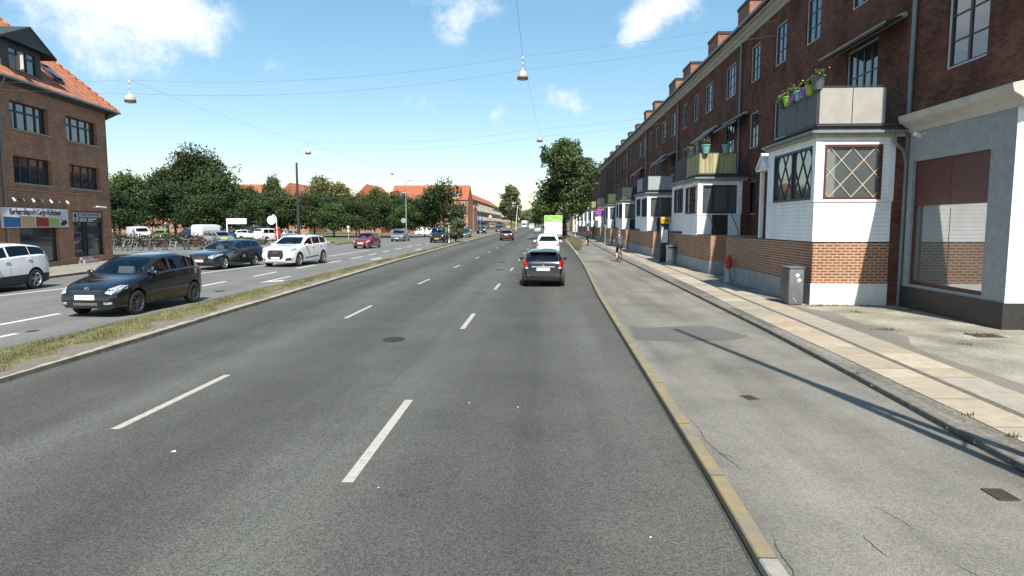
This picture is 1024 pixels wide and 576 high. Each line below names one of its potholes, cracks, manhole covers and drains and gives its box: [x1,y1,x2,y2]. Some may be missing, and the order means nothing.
crack [772,535,794,576]
drain grate [980,488,1021,501]
